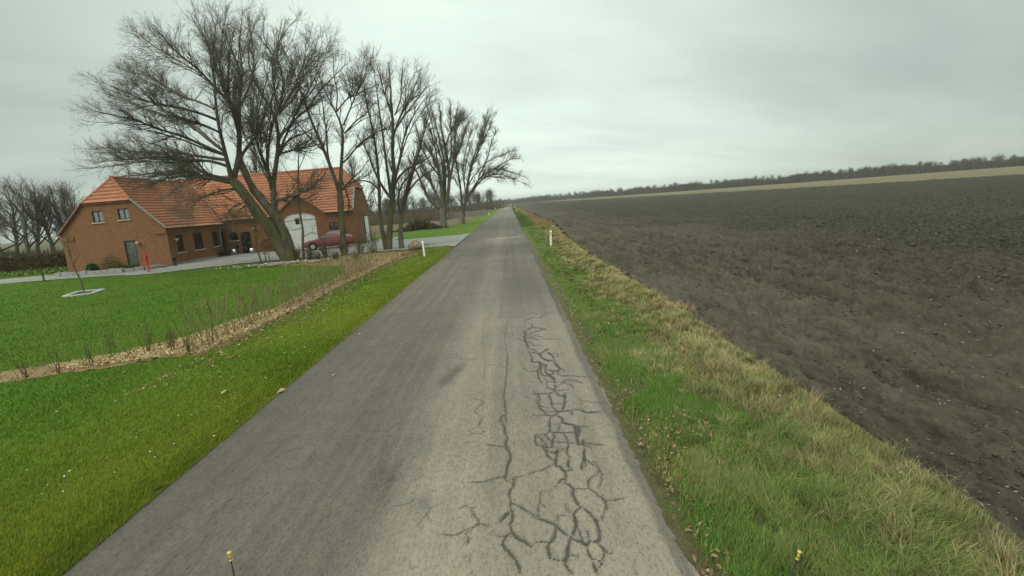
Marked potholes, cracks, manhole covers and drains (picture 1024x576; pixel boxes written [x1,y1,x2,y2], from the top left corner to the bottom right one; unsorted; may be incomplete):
crack [358,315,621,575]
